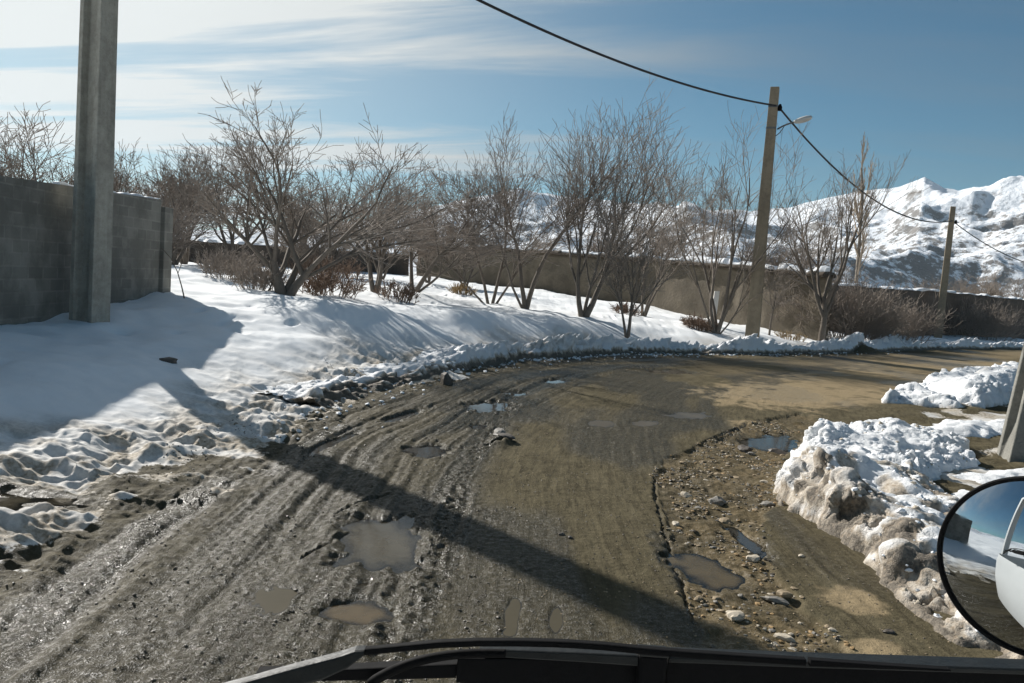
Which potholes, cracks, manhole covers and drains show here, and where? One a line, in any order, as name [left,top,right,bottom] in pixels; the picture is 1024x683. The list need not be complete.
pothole [546,595,570,639]
pothole [499,573,529,638]
pothole [249,581,304,626]
pothole [399,437,467,460]
pothole [305,588,417,626]
pothole [292,489,453,603]
pothole [445,397,523,413]
pothole [656,414,851,654]
